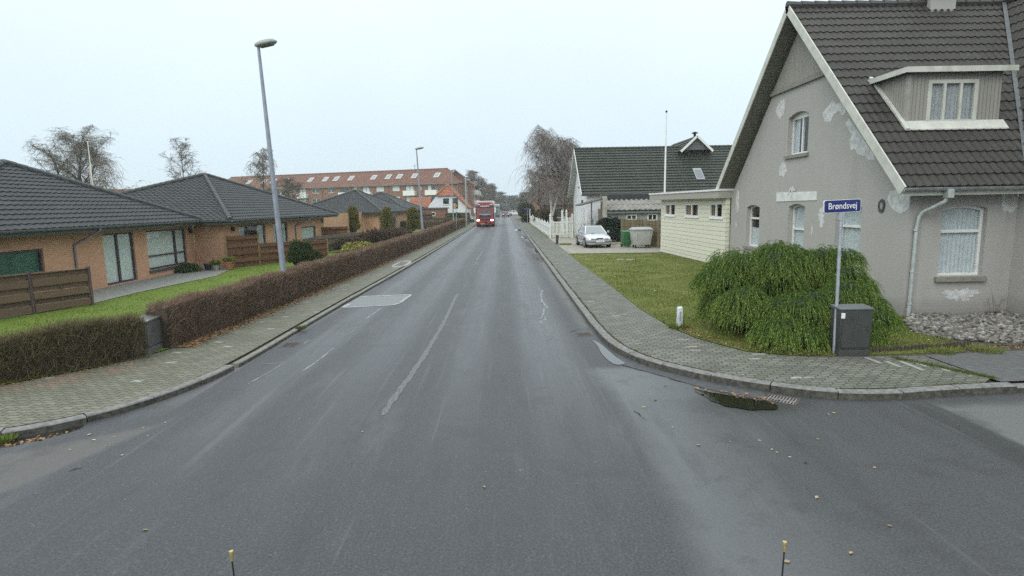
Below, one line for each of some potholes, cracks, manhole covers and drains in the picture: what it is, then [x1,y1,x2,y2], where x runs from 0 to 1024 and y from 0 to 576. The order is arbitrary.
crack [539,290,549,323]
drain grate [764,393,801,406]
